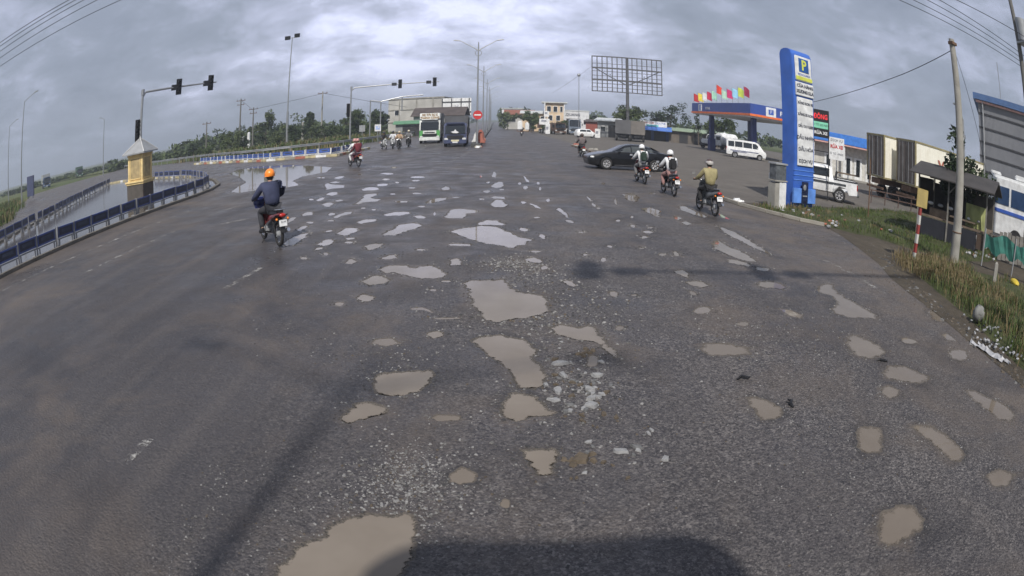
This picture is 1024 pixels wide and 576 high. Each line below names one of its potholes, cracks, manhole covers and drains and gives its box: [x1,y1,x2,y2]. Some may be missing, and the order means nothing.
pothole [549,324,623,359]
pothole [876,504,925,548]
pothole [845,335,886,359]
pothole [371,369,436,396]
pothole [966,390,1015,422]
pothole [882,365,930,384]
pothole [855,426,884,454]
pothole [910,424,966,463]
pothole [274,512,418,576]
pothole [338,401,389,424]
pothole [448,466,478,485]
pothole [450,226,534,249]
